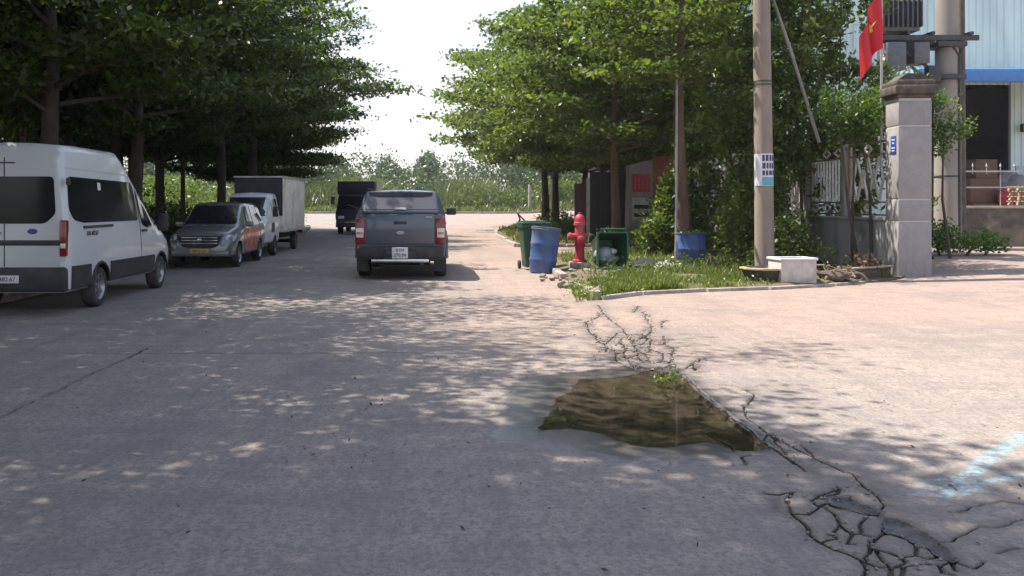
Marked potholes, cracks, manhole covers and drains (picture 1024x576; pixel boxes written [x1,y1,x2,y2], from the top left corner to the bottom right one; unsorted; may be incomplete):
crack [1,348,148,418]
crack [585,306,1013,576]
